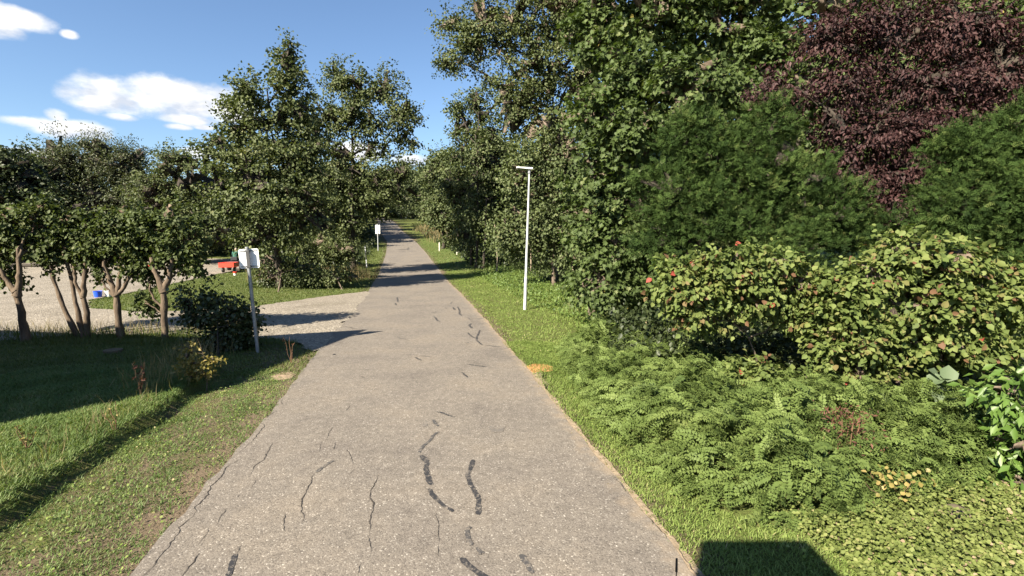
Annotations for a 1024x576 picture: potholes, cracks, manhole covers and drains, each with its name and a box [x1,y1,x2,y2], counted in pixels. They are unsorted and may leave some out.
crack [282,473,315,530]
crack [358,478,378,572]
crack [149,400,283,576]
